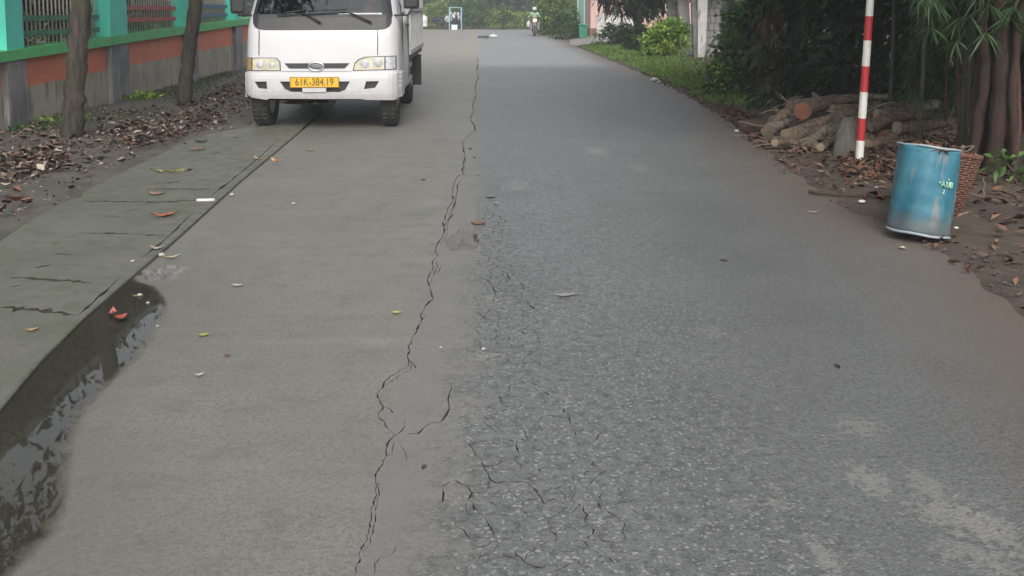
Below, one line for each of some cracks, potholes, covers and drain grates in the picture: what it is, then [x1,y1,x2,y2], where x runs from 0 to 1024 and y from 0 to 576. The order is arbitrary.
crack [354,58,479,576]
crack [473,203,544,399]
crack [435,376,639,571]
